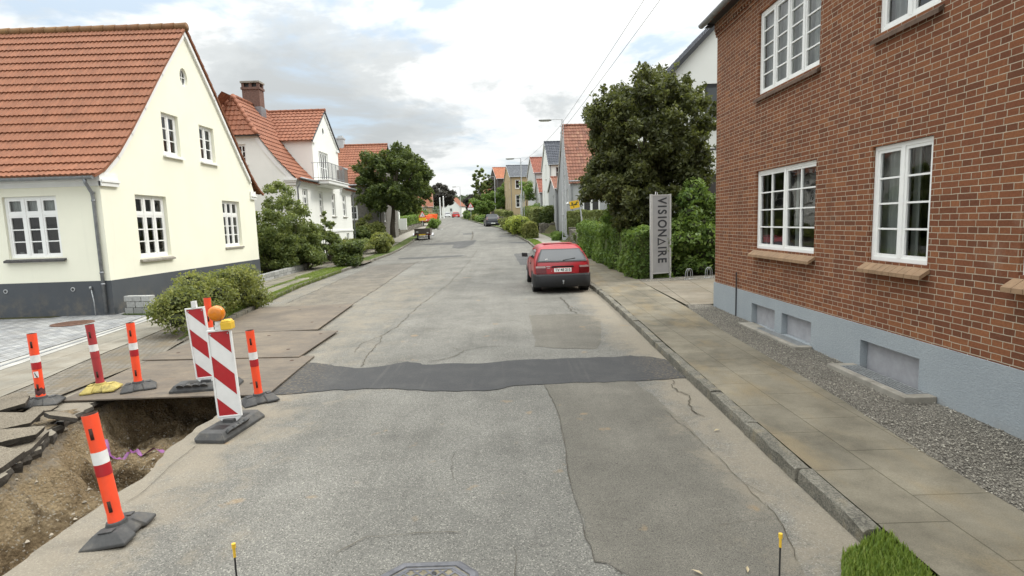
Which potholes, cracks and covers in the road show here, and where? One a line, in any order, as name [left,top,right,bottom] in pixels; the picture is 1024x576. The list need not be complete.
manhole cover [380,561,479,576]
crack [666,380,796,559]
crack [337,531,456,552]
